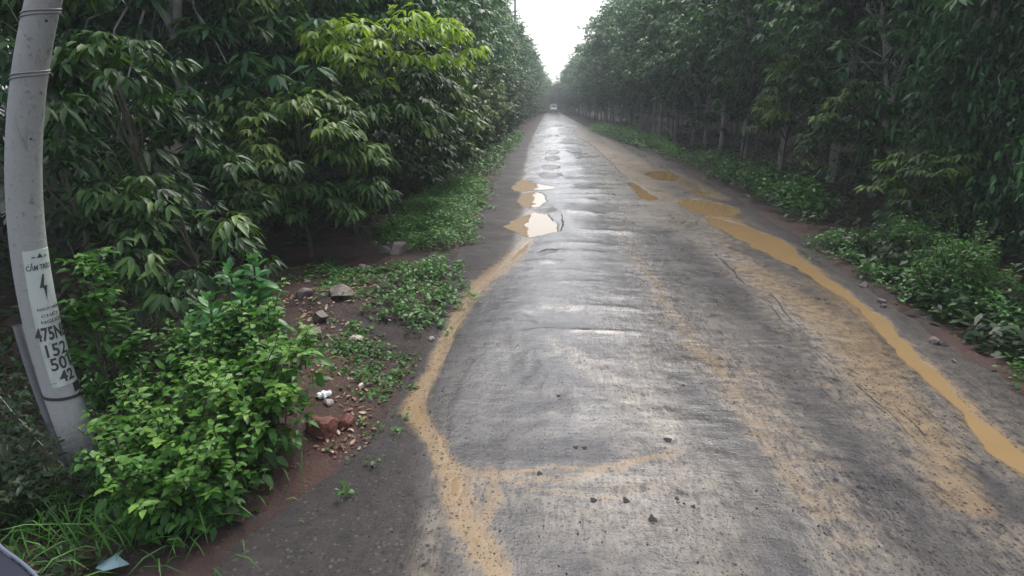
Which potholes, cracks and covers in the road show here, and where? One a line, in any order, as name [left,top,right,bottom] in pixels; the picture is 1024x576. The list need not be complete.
crack [852,380,927,439]
pothole [511,180,556,192]
pothole [678,199,740,217]
pothole [503,212,558,238]
pothole [517,191,547,208]
pothole [644,170,681,181]
